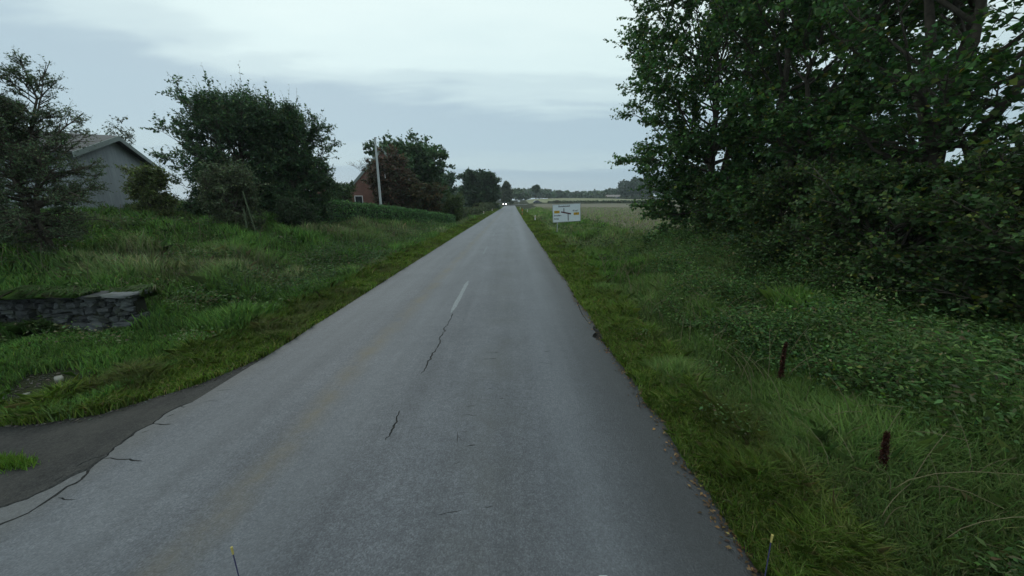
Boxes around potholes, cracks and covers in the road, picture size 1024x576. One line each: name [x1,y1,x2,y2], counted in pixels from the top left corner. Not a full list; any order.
crack [0,386,232,525]
crack [421,314,453,373]
